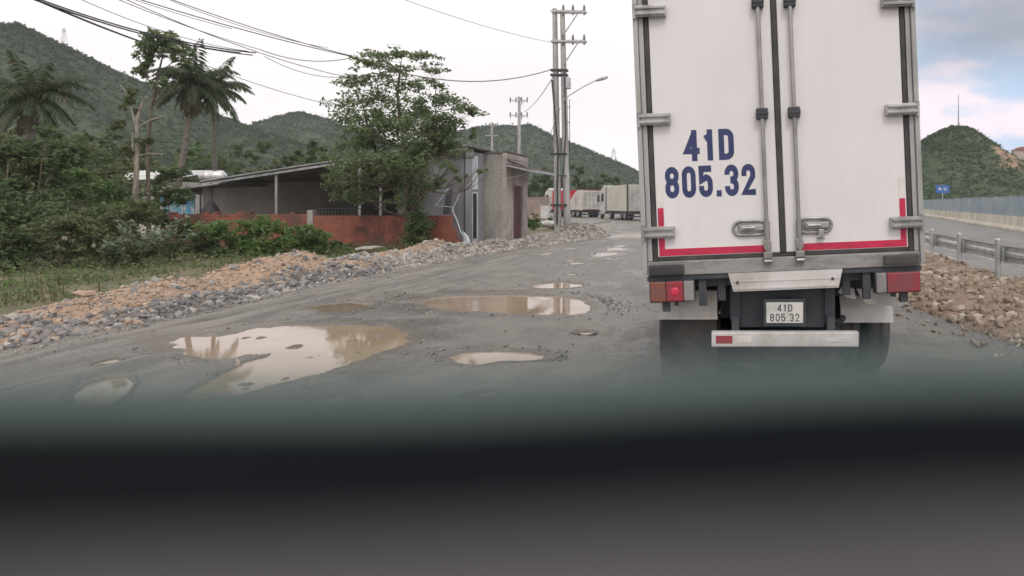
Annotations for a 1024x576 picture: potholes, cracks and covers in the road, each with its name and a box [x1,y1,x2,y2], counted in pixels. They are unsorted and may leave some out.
pothole [89,357,125,366]
pothole [424,344,572,367]
pothole [293,298,387,315]
pothole [519,278,589,289]
pothole [376,287,650,319]
pothole [120,317,438,376]
